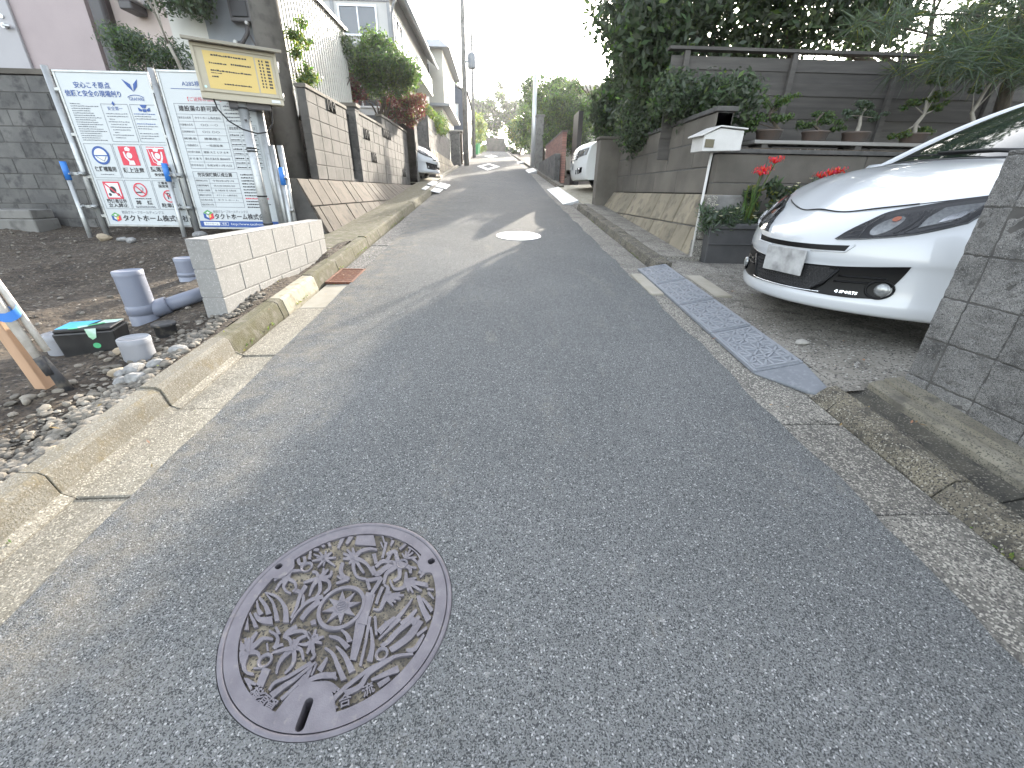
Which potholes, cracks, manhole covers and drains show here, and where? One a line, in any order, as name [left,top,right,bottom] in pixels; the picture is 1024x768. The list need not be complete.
manhole cover [216,523,452,743]
drain grate [325,268,365,285]
manhole cover [495,231,542,241]
